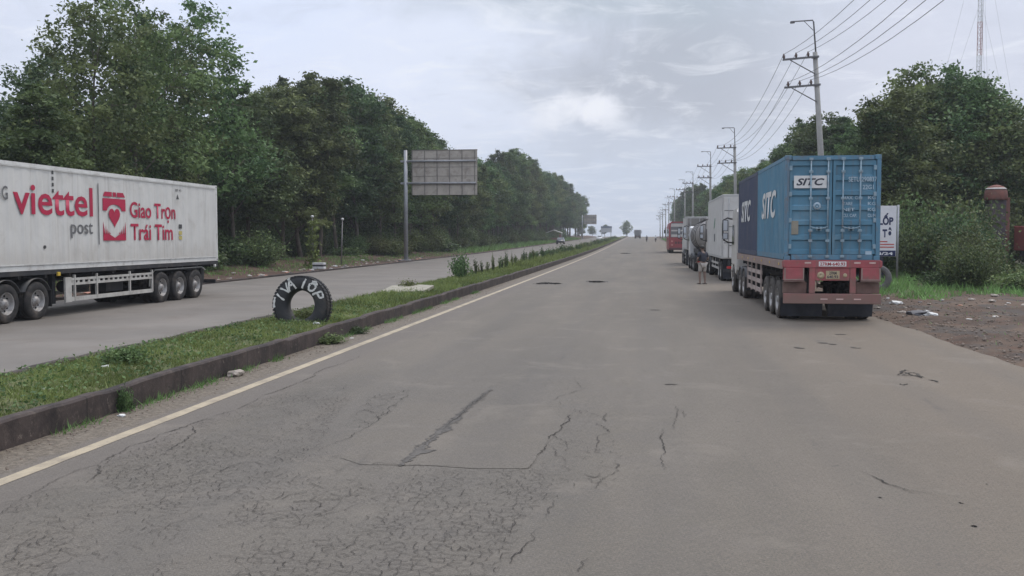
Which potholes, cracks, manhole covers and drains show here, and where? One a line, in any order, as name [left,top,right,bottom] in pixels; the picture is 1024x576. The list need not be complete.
crack [0,379,584,576]
crack [2,355,360,503]
crack [330,375,621,488]
